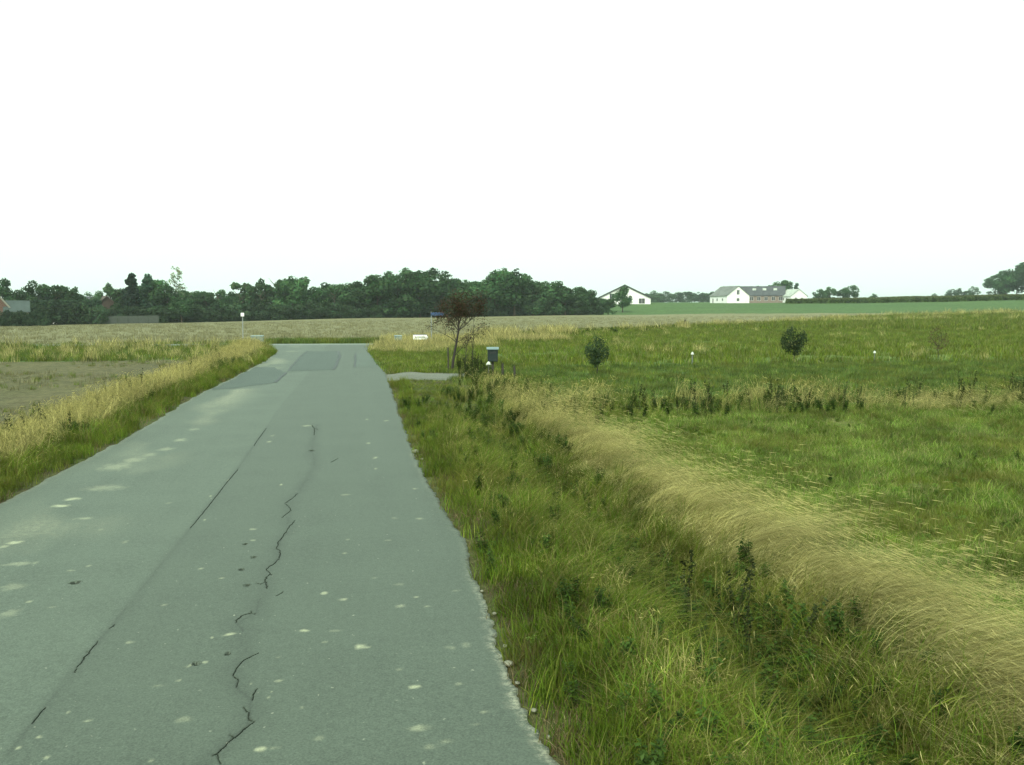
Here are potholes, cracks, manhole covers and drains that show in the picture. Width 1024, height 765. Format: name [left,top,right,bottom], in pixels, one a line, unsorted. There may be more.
crack [213,652,259,764]
crack [257,495,296,596]
